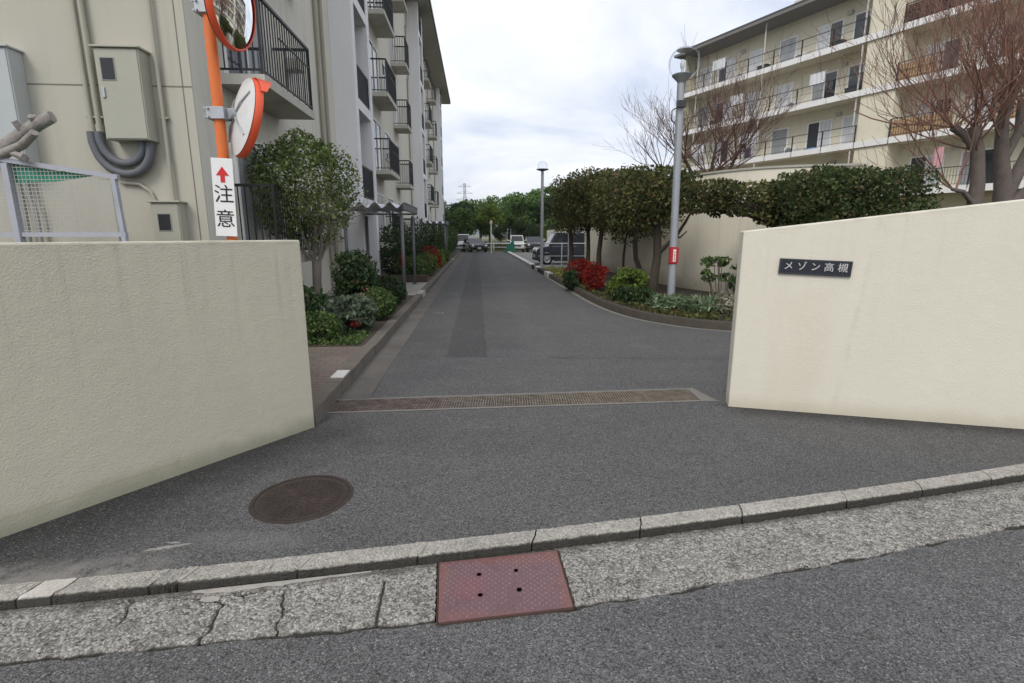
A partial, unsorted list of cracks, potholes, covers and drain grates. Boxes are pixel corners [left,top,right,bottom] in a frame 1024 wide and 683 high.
drain grate [593,391,650,403]
drain grate [641,389,699,402]
crack [183,591,285,647]
drain grate [494,394,546,407]
drain grate [440,396,494,408]
drain grate [328,399,392,412]
manhole cover [249,475,354,524]
drain grate [384,397,444,410]
drain grate [544,392,598,405]
